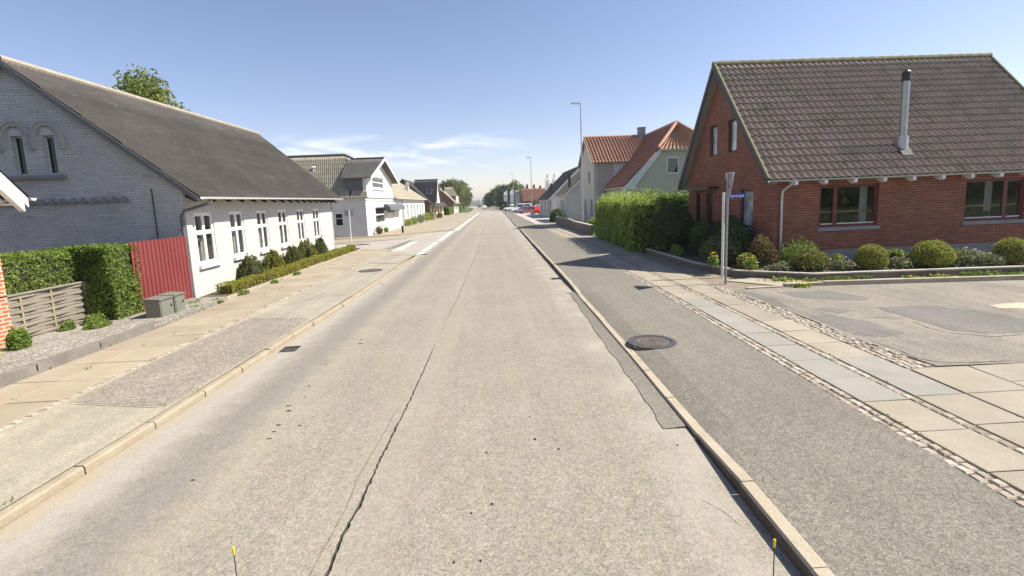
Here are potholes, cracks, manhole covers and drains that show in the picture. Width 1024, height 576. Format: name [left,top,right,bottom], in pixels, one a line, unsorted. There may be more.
crack [309,347,434,576]
manhole cover [628,335,677,350]
